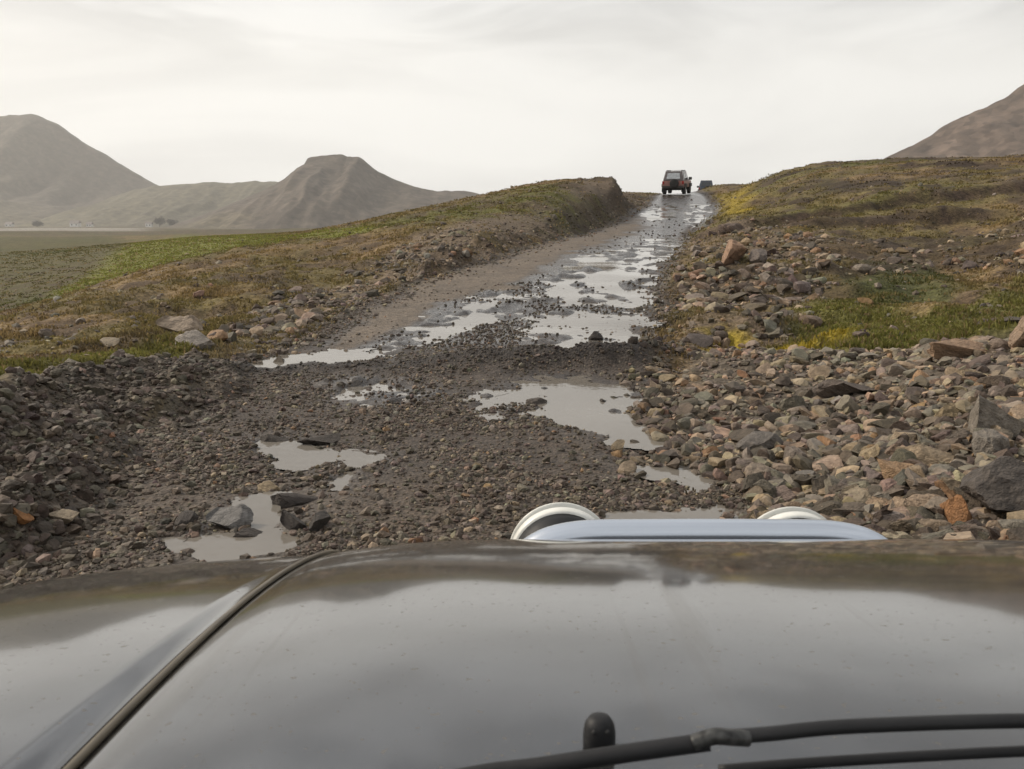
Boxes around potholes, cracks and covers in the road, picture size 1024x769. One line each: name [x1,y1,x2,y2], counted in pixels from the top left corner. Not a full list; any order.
pothole [505,308,670,348]
pothole [335,448,386,469]
pothole [158,531,193,554]
pothole [630,463,719,494]
pothole [496,365,664,454]
pothole [183,527,301,562]
pothole [373,287,540,351]
pothole [676,203,722,231]
pothole [232,491,292,533]
pothole [300,376,442,407]
pothole [251,348,396,372]
pothole [517,236,688,309]
